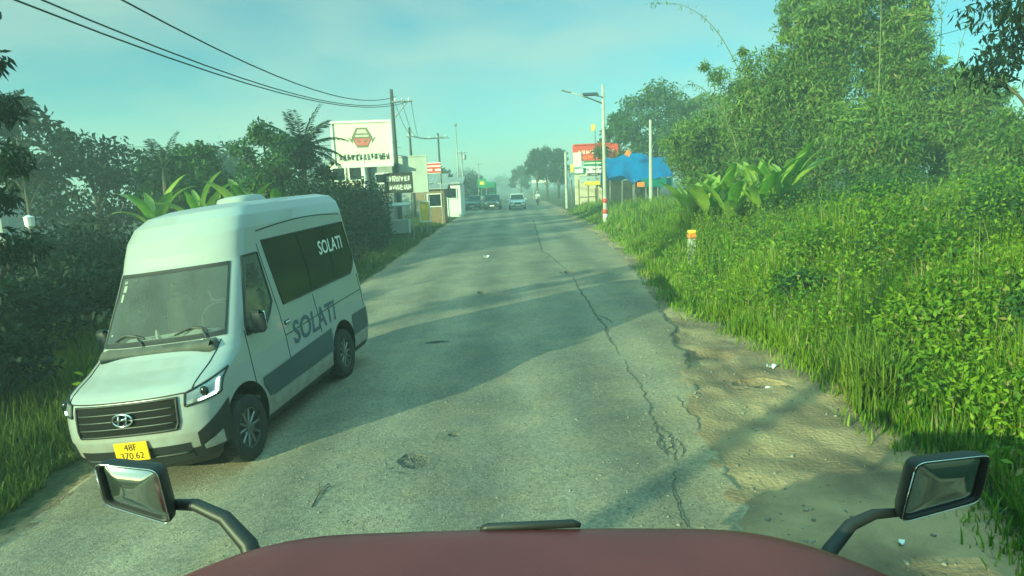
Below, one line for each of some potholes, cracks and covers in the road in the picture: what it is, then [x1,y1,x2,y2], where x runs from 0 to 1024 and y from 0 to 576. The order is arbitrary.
crack [533,219,700,460]
pothole [385,449,441,474]
crack [672,473,692,529]
